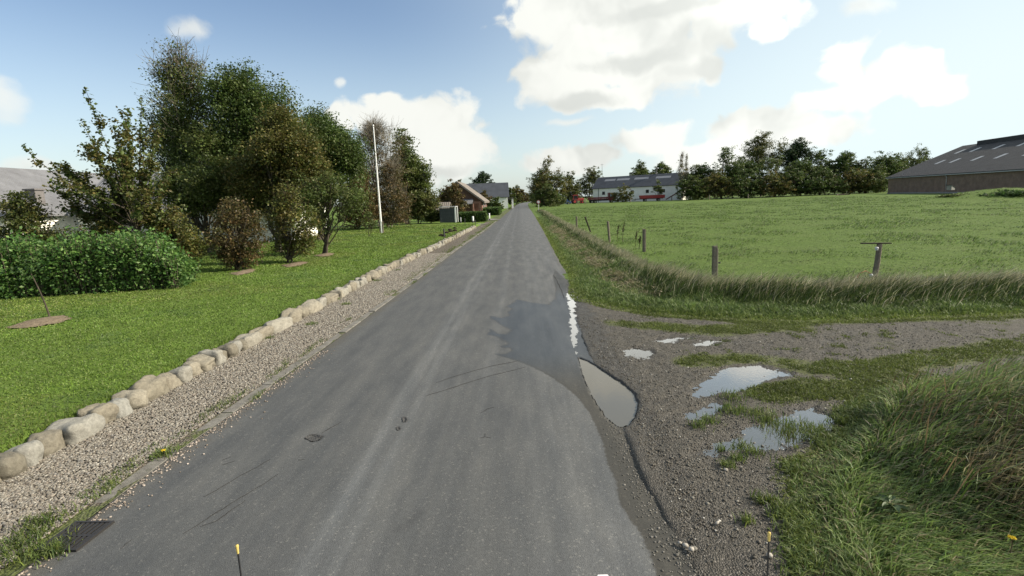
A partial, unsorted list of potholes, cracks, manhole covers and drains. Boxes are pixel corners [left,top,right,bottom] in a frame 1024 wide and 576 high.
crack [183,458,278,534]
pothole [578,357,639,428]
drain grate [34,520,115,552]
